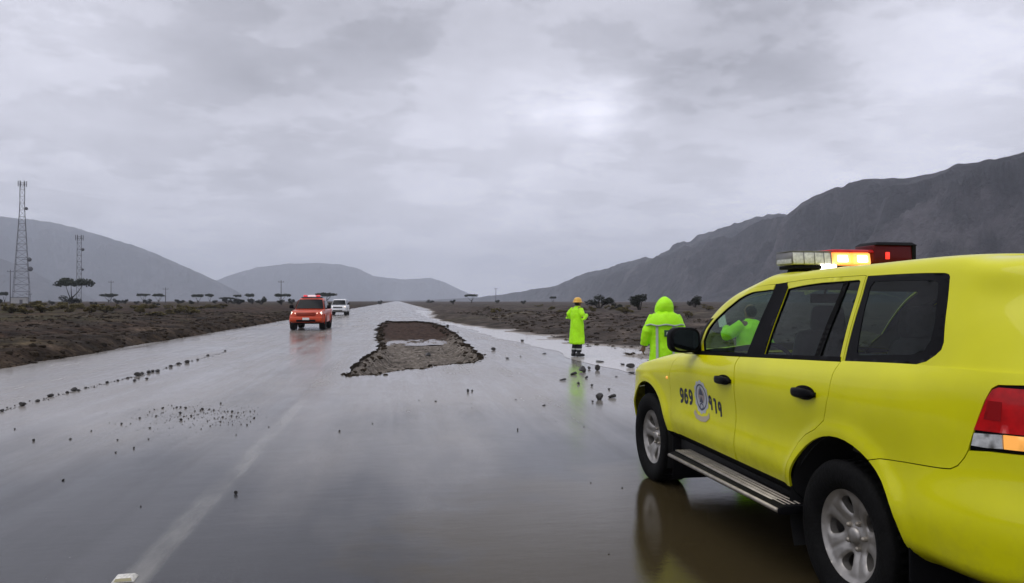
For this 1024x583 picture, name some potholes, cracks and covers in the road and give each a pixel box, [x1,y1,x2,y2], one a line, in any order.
pothole [340,322,486,377]
